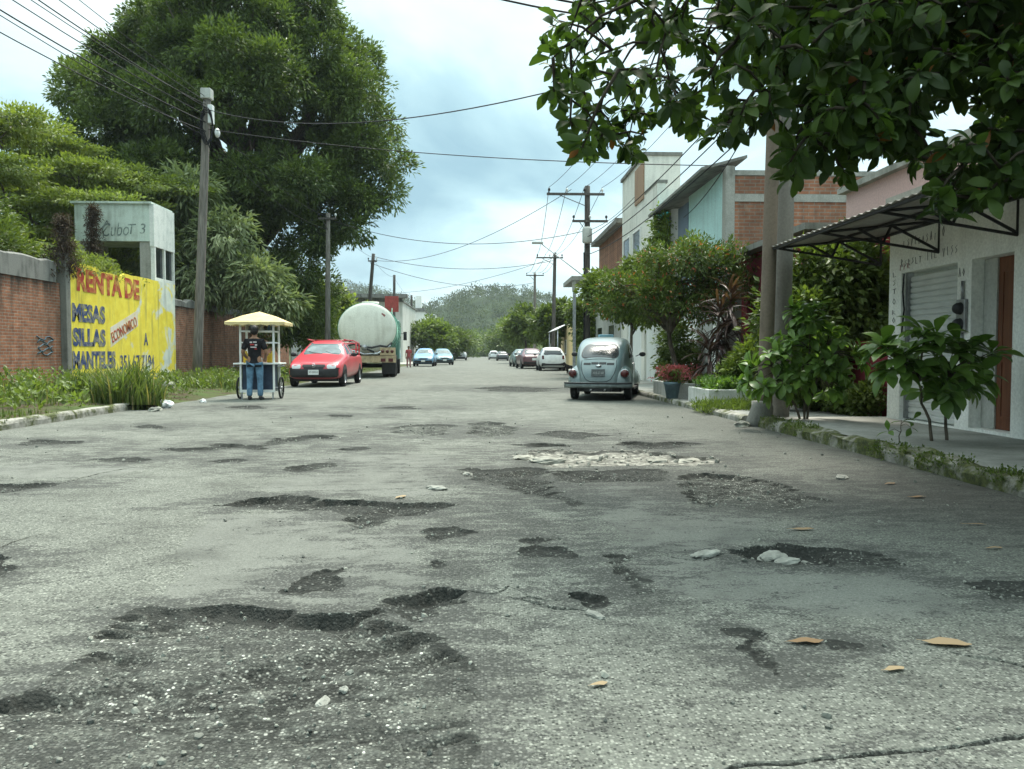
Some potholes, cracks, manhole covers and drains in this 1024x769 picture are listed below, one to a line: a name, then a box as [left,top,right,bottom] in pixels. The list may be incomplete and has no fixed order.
pothole [0,604,484,769]
pothole [963,580,1024,604]
pothole [278,566,353,596]
pothole [674,473,834,514]
pothole [515,544,584,560]
pothole [567,591,615,610]
pothole [420,526,480,543]
pothole [389,424,460,436]
pothole [719,627,784,677]
pothole [208,494,462,530]
pothole [457,467,587,507]
pothole [377,586,470,623]
